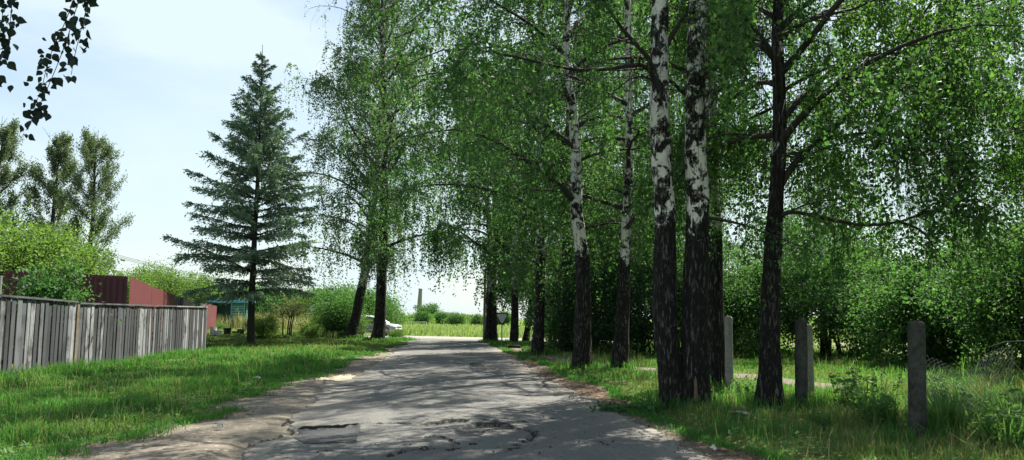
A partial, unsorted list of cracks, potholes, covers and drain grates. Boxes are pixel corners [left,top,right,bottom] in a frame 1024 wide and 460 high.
crack [376,419,540,457]
pothole [454,425,509,437]
